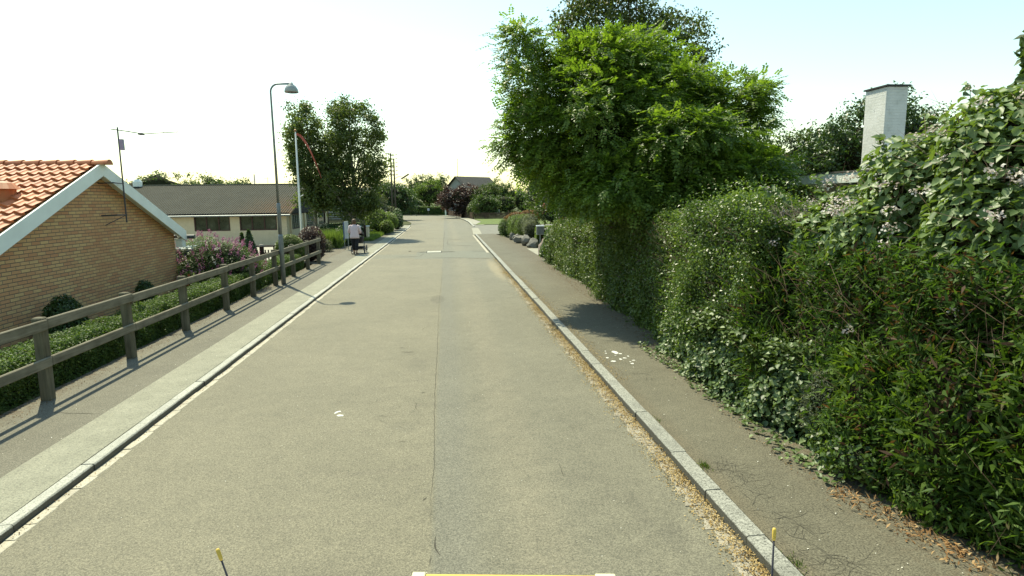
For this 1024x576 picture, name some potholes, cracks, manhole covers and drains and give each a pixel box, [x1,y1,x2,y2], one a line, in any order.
crack [705,458,896,576]
